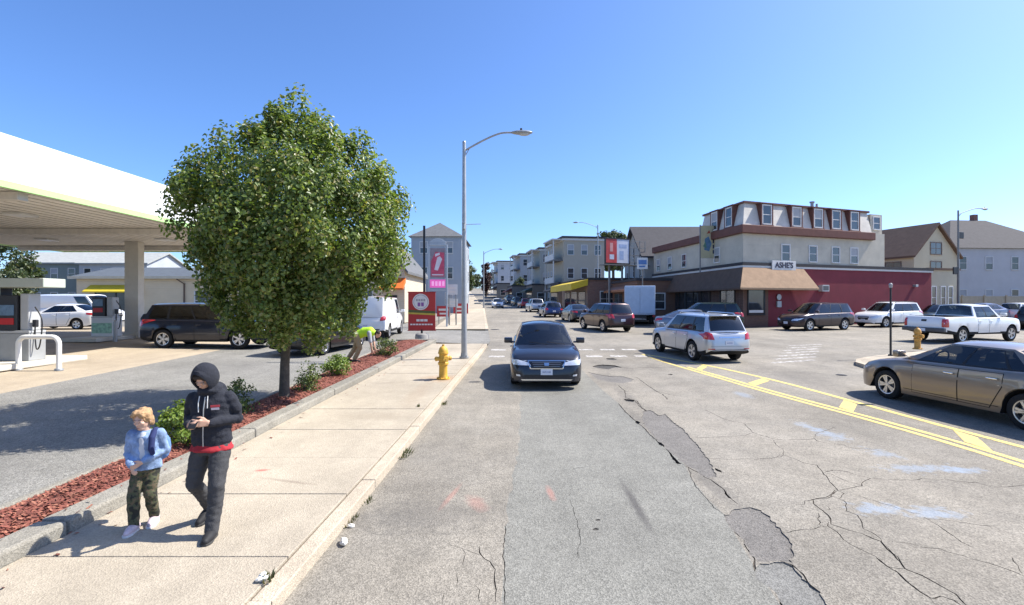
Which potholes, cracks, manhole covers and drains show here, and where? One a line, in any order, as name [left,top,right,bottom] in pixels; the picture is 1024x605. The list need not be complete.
crack [700,410,1023,605]
crack [619,367,677,461]
crack [443,526,506,604]
